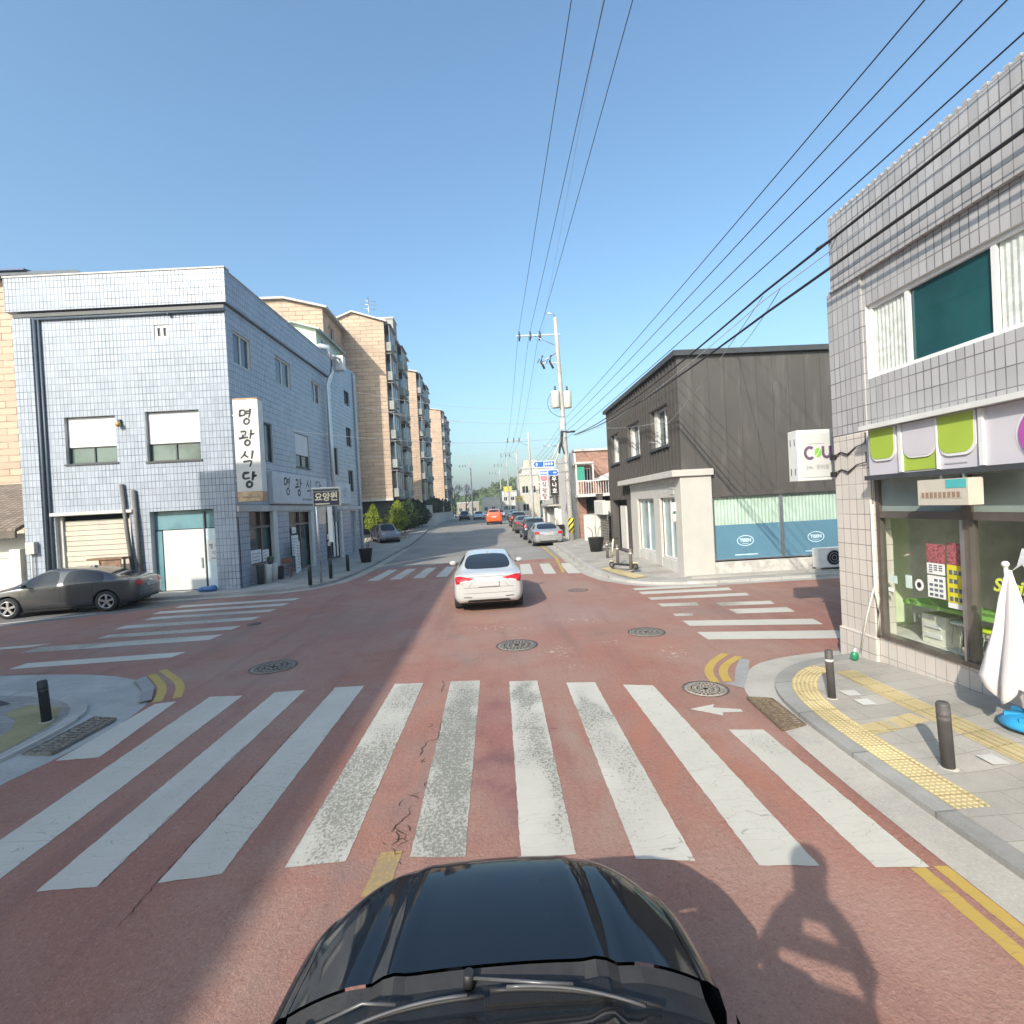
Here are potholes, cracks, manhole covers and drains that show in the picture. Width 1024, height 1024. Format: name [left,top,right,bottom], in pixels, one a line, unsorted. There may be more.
manhole cover [682,681,730,697]
manhole cover [628,627,665,637]
drain grate [747,696,807,731]
manhole cover [248,660,298,674]
crack [383,658,480,864]
manhole cover [496,639,538,651]
drain grate [21,716,117,755]
